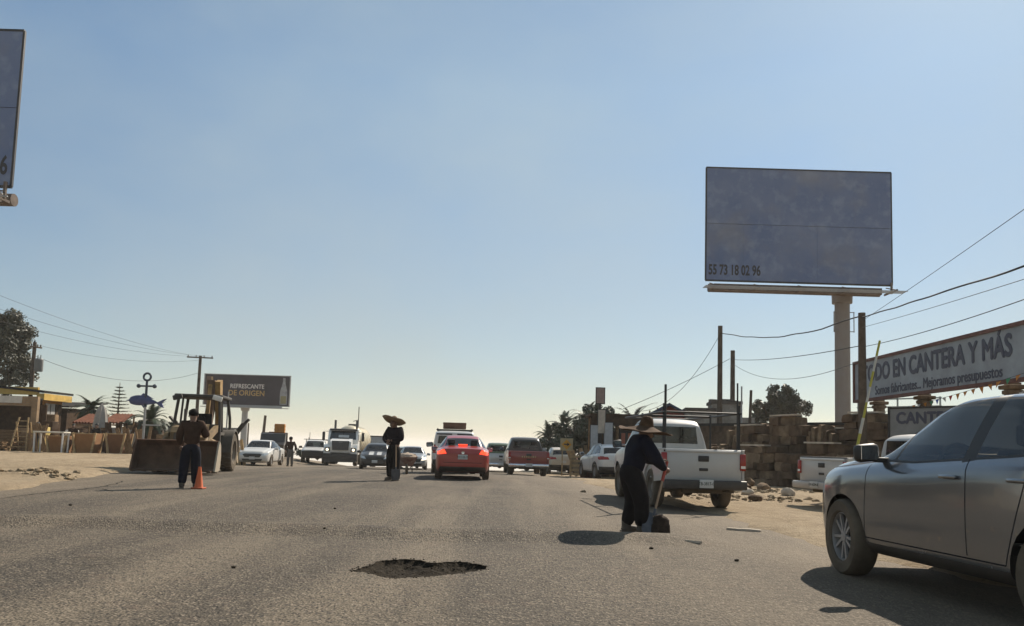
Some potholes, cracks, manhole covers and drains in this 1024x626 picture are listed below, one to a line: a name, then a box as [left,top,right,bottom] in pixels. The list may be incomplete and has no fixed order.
pothole [350,558,489,579]
